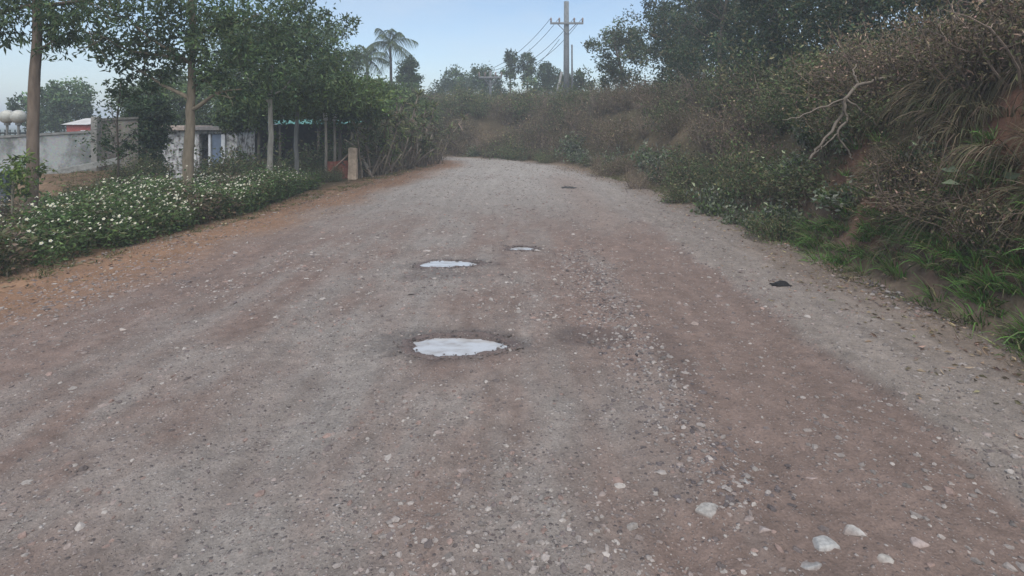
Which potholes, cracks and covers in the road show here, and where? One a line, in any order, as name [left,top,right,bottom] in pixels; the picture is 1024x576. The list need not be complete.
pothole [399,331,522,360]
pothole [415,259,486,269]
